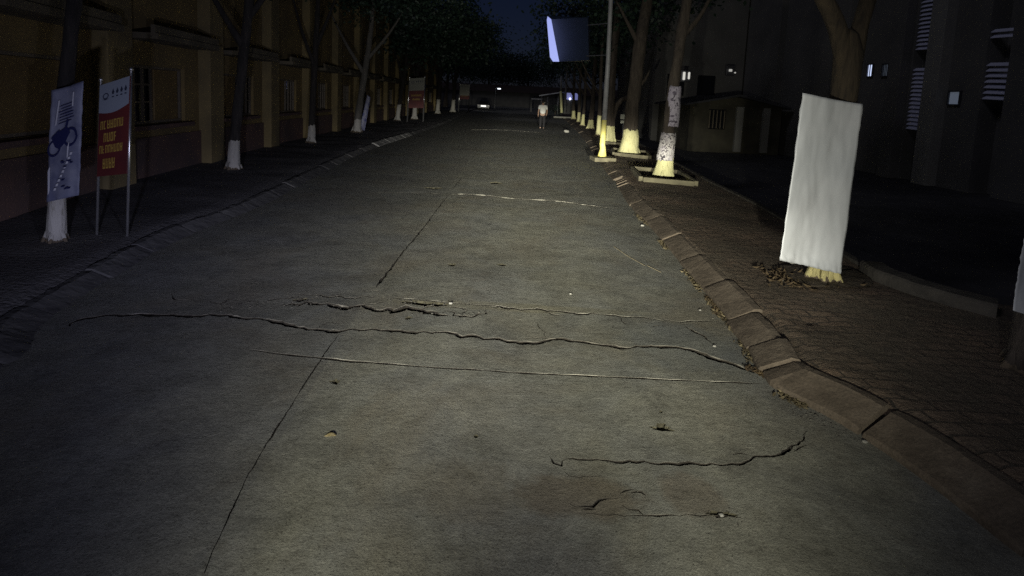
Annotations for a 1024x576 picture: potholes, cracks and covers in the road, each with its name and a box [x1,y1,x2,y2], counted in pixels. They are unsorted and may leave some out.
crack [550,431,807,478]
crack [570,489,646,515]
crack [64,289,755,373]
pothole [650,423,675,431]
